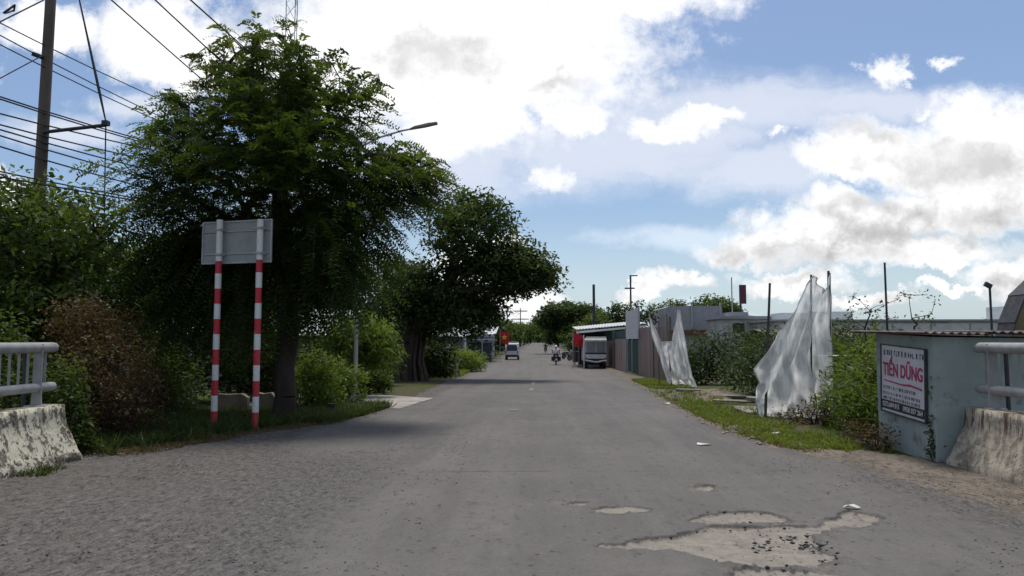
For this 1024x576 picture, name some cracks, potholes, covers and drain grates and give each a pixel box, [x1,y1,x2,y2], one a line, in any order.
pothole [558,499,597,507]
pothole [565,504,917,576]
pothole [669,480,743,496]
